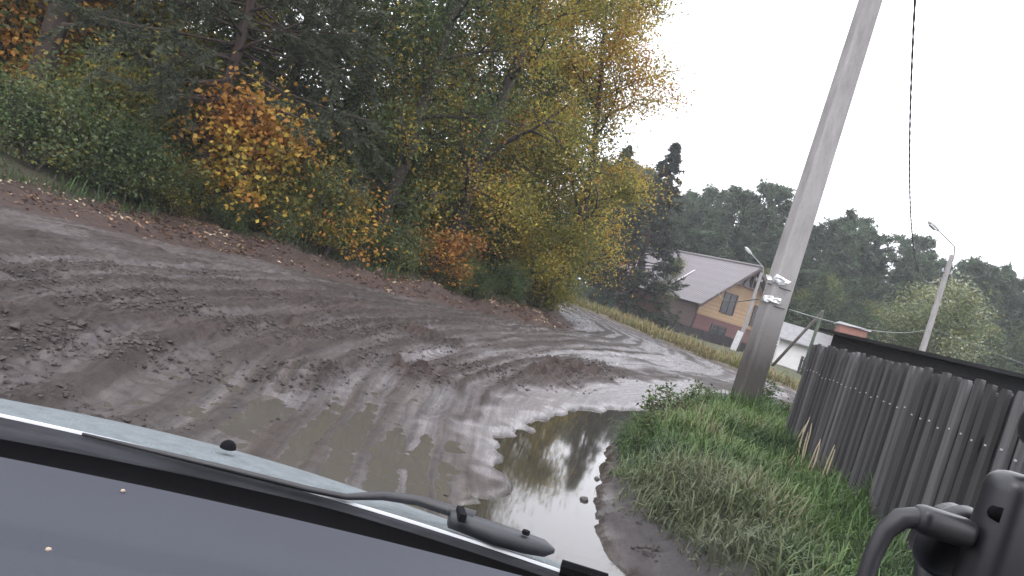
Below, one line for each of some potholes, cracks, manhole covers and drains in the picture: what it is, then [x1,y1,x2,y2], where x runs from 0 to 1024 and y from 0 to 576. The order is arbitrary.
pothole [447,403,657,576]
